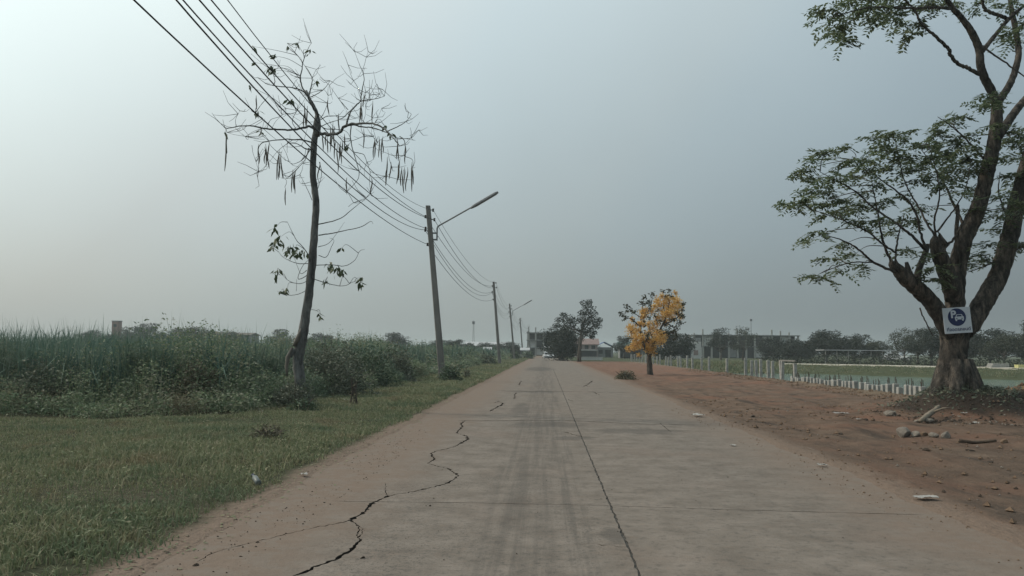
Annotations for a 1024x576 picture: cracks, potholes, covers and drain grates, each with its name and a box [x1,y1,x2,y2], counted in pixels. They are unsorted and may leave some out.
crack [276,421,469,576]
